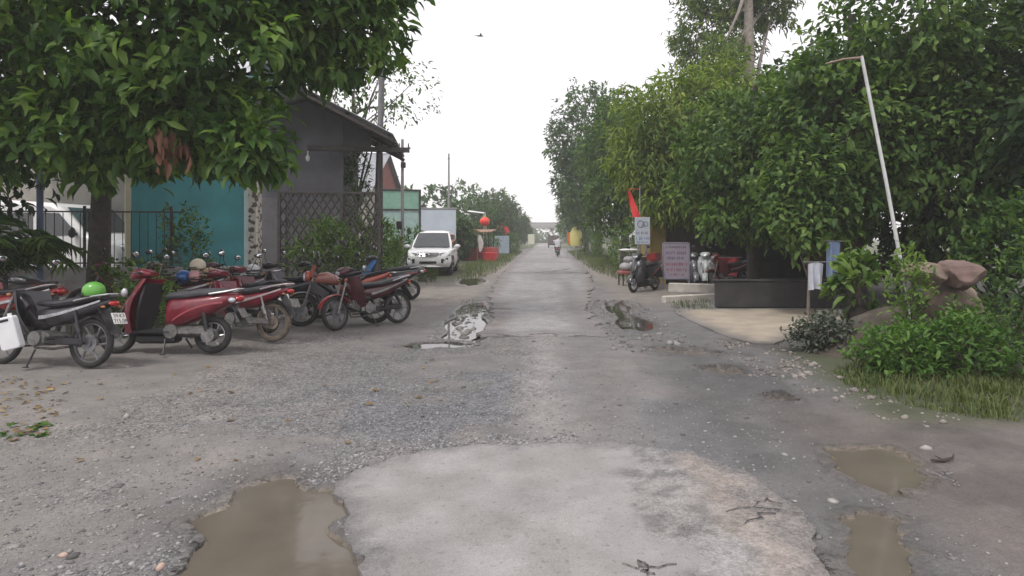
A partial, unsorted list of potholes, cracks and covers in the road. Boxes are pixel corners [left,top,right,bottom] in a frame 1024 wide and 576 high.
crack [622,559,677,576]
pothole [751,389,809,404]
pothole [437,301,492,342]
pothole [601,300,661,332]
pothole [456,277,489,286]
pothole [159,471,365,576]
pothole [818,505,935,576]
pothole [395,341,478,351]
pothole [687,363,756,377]
pothole [812,442,942,503]
crack [726,497,805,524]
